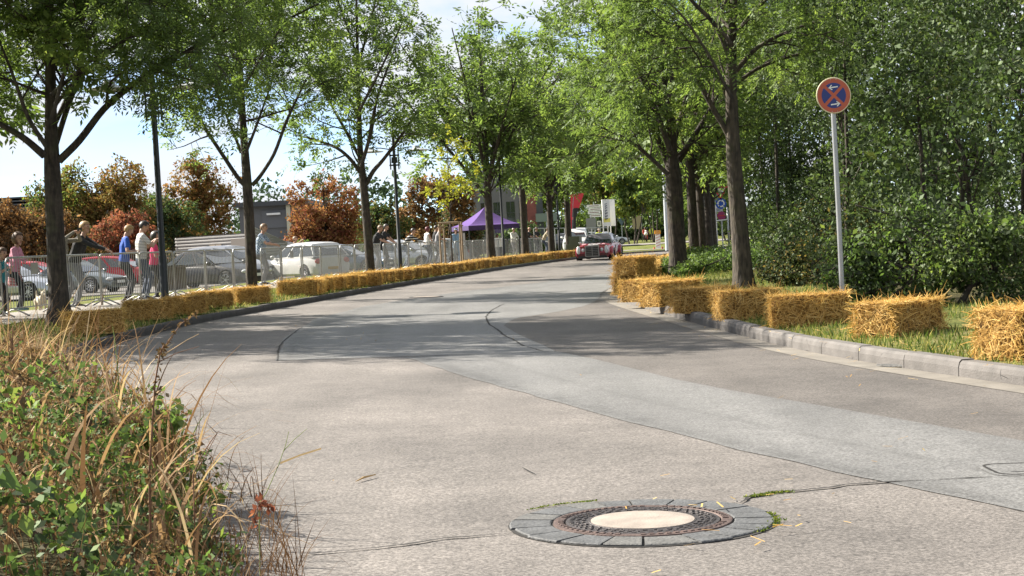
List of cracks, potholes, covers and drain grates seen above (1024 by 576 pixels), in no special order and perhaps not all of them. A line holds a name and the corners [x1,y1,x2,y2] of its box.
manhole cover [976,462,1024,476]
manhole cover [508,499,778,547]
